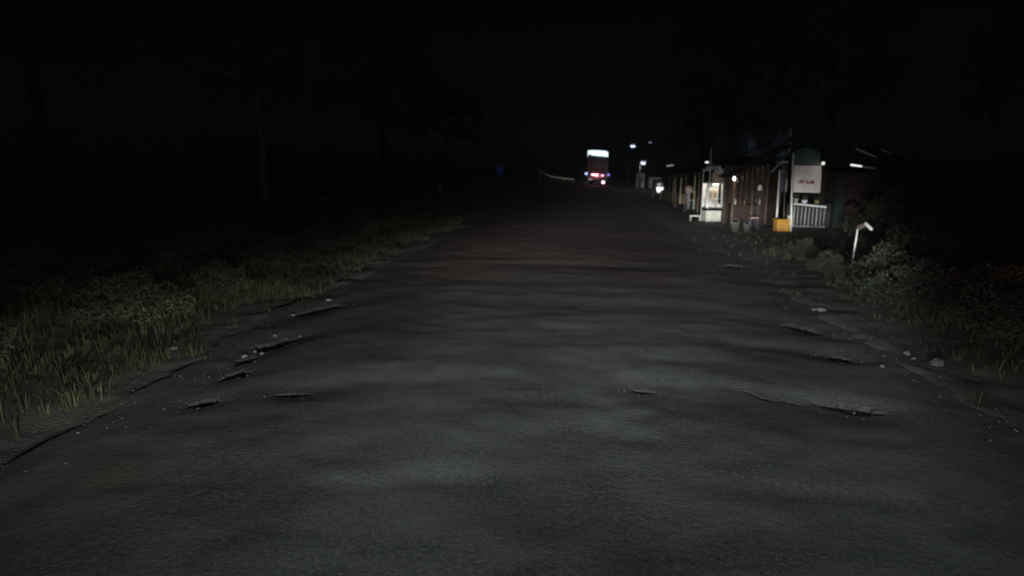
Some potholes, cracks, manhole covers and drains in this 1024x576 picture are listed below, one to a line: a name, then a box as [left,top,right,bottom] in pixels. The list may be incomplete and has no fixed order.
pothole [245,337,303,354]
pothole [232,355,263,367]
pothole [217,369,255,383]
pothole [289,303,347,318]
pothole [780,323,823,336]
pothole [184,398,223,409]
pothole [810,401,892,417]
pothole [824,356,852,364]
